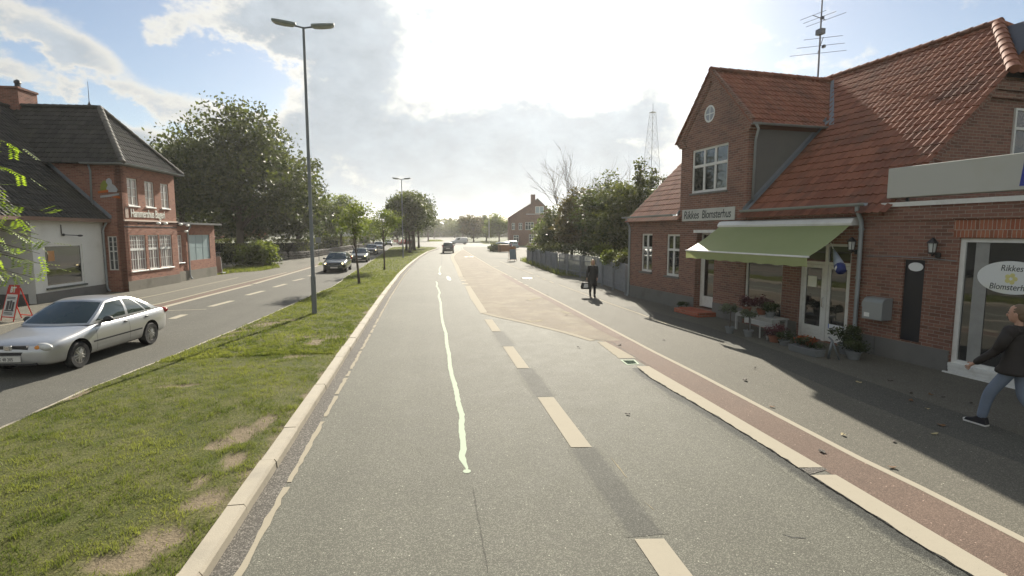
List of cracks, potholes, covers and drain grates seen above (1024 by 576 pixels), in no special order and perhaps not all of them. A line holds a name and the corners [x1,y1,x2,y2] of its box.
crack [473,489,488,571]
